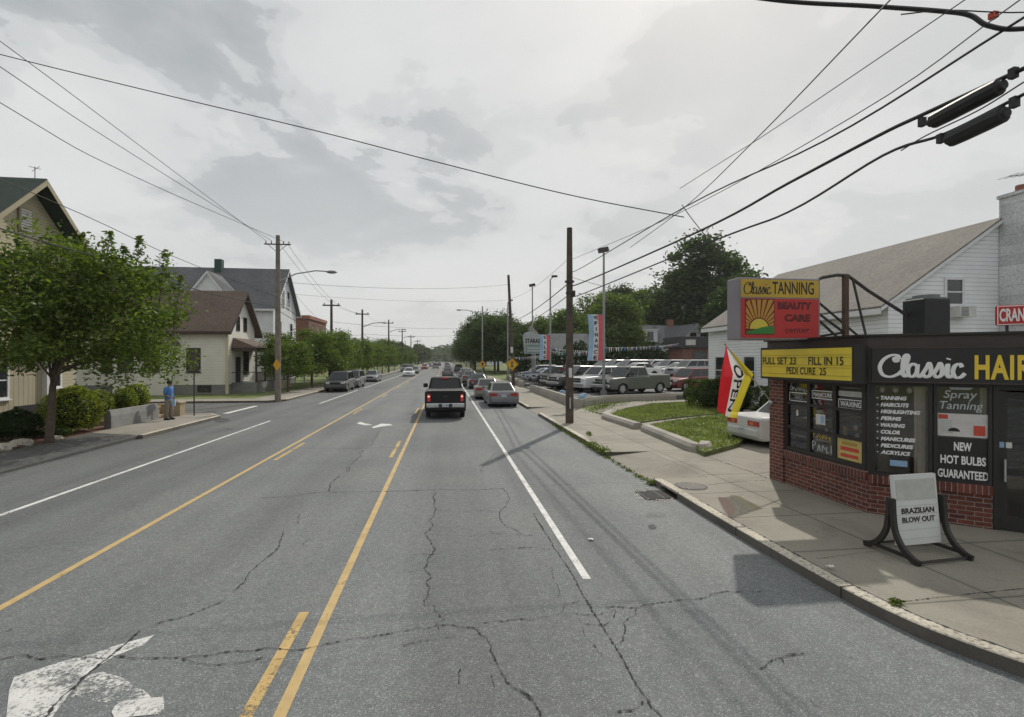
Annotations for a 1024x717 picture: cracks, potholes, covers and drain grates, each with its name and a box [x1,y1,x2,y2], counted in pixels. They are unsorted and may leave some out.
manhole cover [674,482,708,490]
crack [2,488,762,717]
crack [760,653,804,668]
